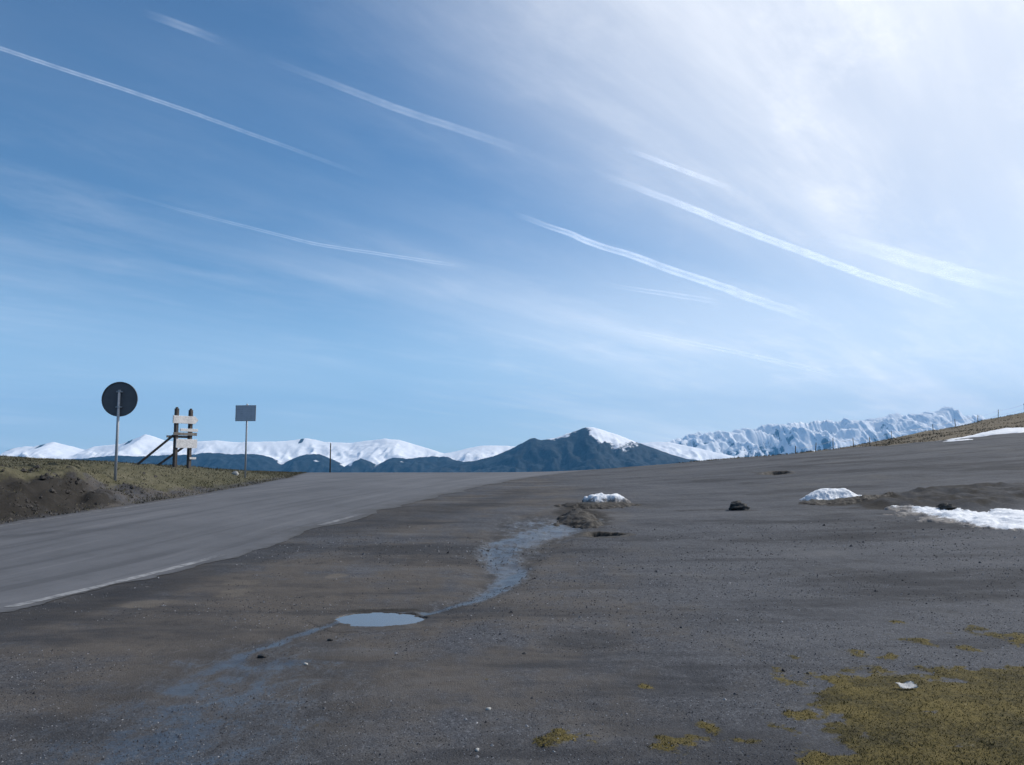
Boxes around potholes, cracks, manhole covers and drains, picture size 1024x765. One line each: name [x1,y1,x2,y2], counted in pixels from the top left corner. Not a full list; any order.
pothole [308,609,451,633]
